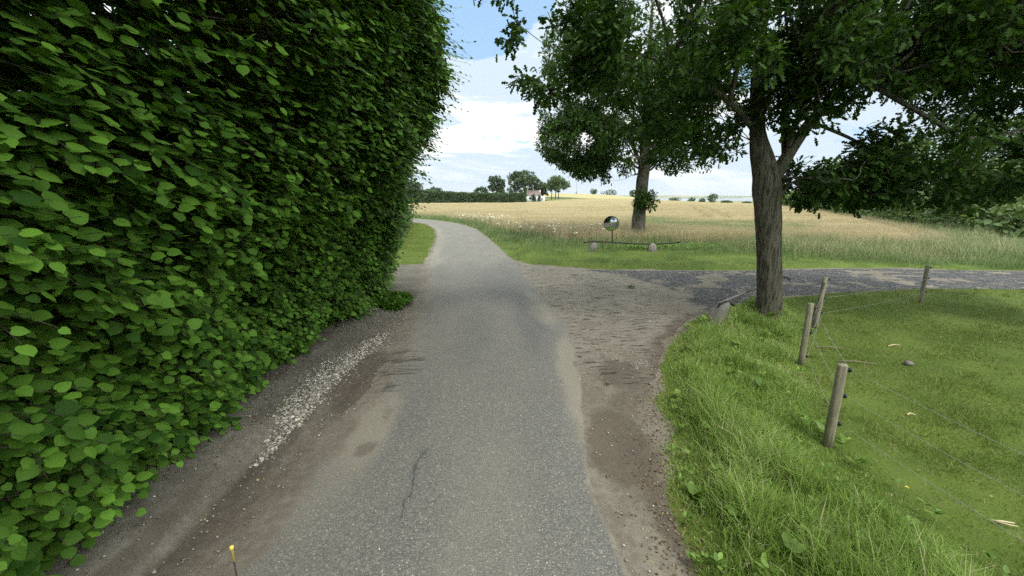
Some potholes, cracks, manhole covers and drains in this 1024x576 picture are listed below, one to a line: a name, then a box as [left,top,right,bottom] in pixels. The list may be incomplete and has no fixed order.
crack [399,450,430,522]
